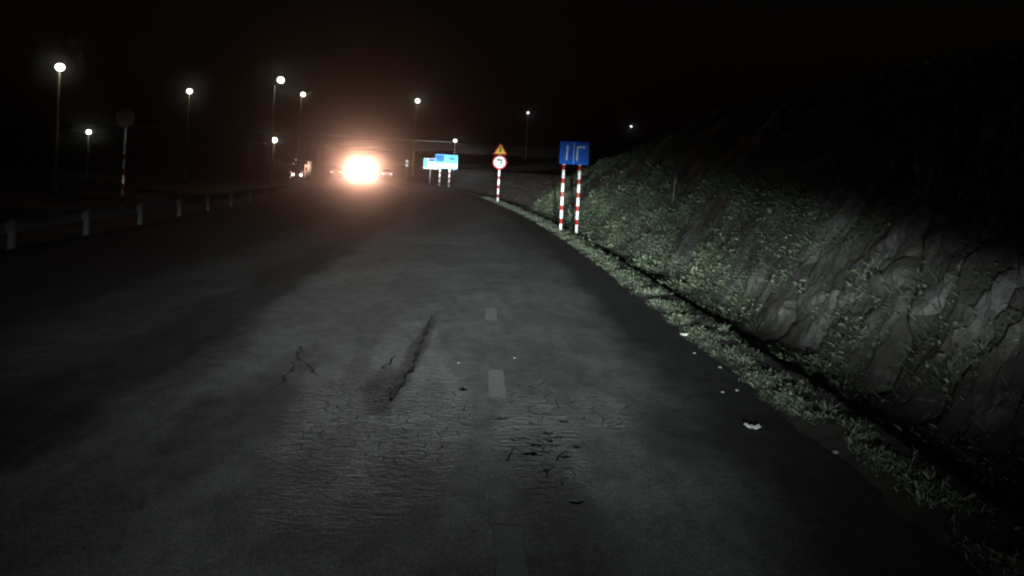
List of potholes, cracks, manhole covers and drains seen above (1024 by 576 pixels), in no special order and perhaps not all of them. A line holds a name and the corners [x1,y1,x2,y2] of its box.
crack [277,298,470,485]
crack [497,381,630,505]
